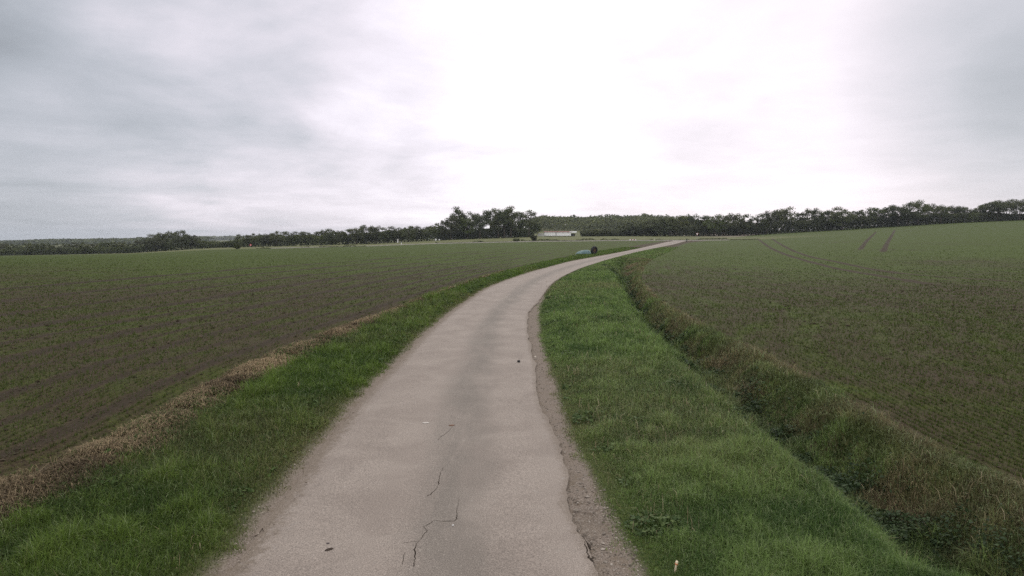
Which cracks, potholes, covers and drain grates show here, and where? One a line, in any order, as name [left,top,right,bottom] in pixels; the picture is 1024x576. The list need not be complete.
crack [402,510,457,566]
